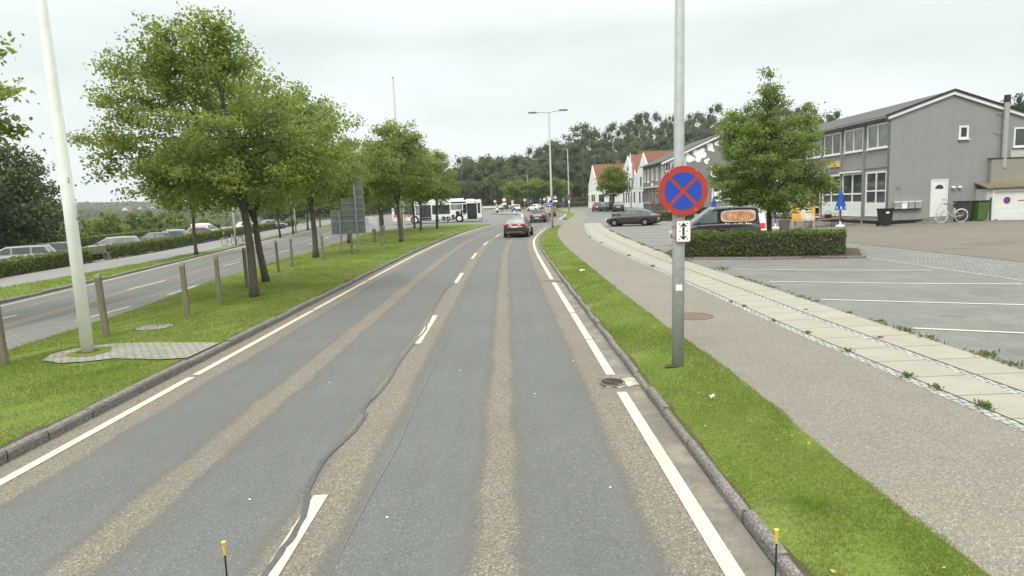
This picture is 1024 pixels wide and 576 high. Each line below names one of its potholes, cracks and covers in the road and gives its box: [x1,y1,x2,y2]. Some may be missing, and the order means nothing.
manhole cover [684,312,714,320]
